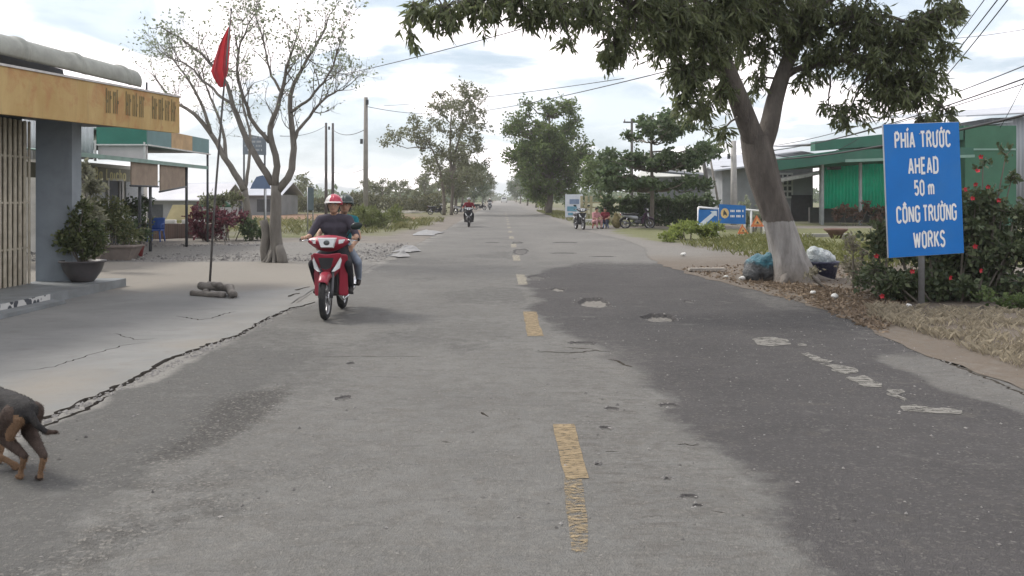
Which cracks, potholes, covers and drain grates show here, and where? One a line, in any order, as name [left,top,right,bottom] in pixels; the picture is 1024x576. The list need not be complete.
crack [544,347,632,367]
pothole [639,313,679,322]
crack [16,287,315,437]
pothole [577,297,612,308]
